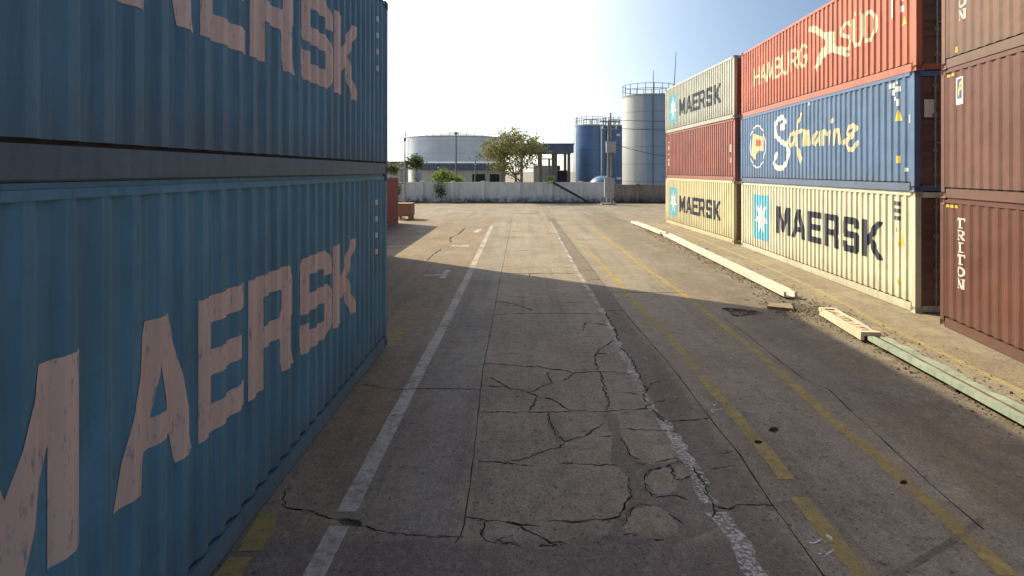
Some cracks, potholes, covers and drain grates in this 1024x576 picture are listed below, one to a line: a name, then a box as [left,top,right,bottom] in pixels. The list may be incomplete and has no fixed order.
crack [281,296,774,547]
pothole [722,308,764,317]
